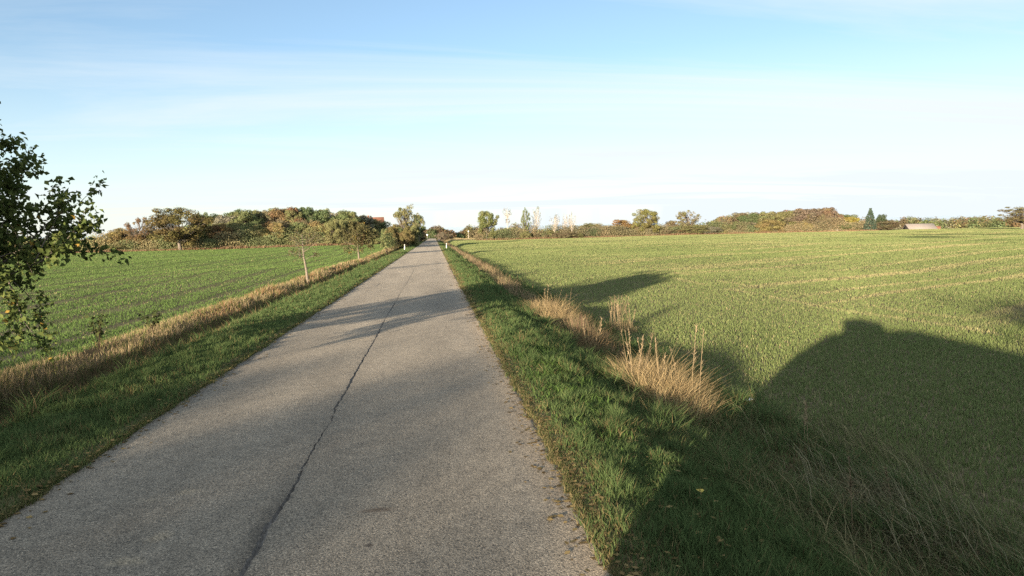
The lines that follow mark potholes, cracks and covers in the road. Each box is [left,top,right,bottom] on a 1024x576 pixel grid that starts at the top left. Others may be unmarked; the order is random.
crack [239,270,414,576]
